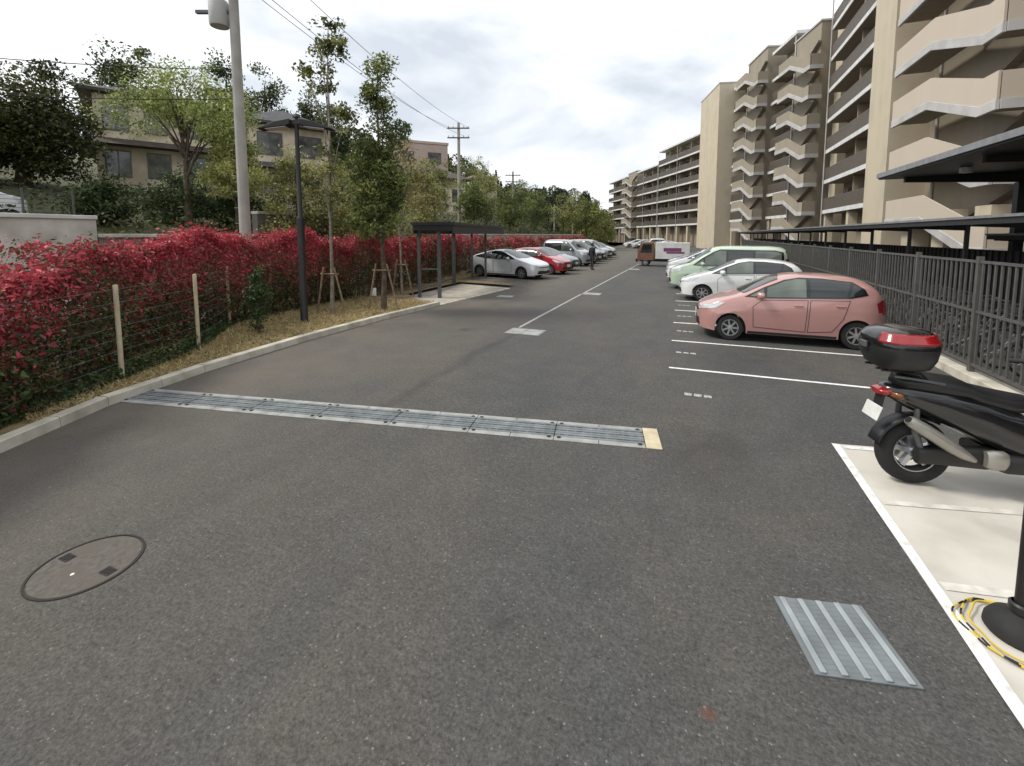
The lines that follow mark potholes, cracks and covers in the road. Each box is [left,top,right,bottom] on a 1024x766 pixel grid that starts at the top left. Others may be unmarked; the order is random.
drain grate [773,596,924,690]
manhole cover [20,534,146,602]
